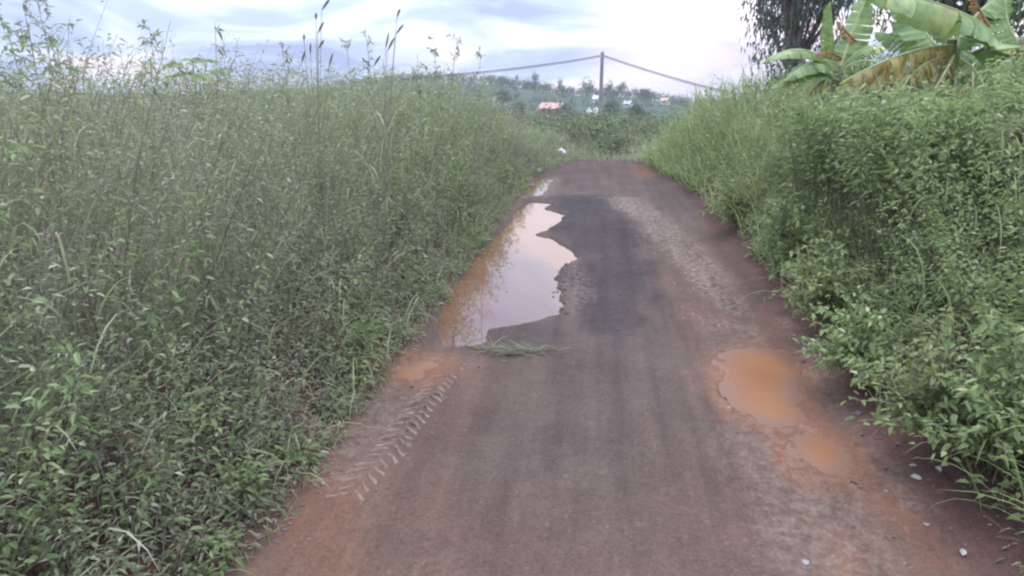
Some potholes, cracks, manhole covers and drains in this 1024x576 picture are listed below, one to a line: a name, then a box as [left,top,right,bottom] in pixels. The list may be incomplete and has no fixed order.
pothole [516,177,558,196]
pothole [425,200,586,351]
pothole [772,426,869,484]
pothole [702,344,820,432]
